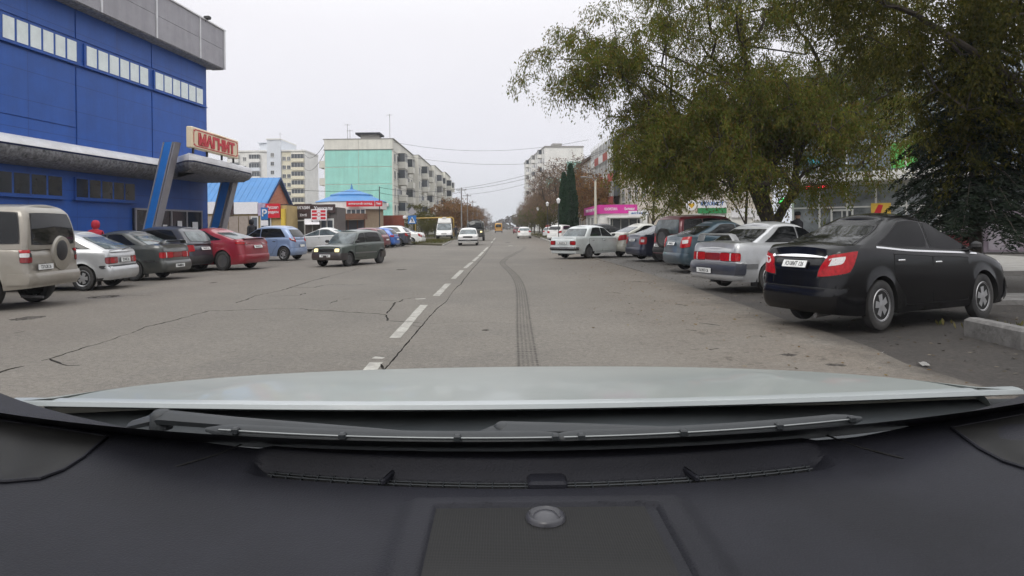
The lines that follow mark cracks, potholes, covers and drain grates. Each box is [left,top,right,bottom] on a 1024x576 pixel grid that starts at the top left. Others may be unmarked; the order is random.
crack [202,268,512,328]
crack [41,313,199,366]
